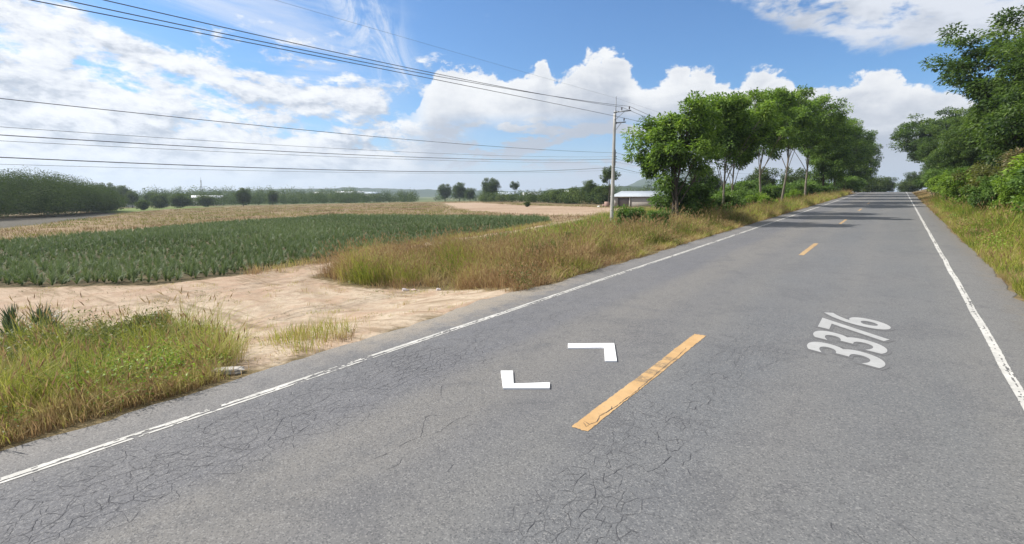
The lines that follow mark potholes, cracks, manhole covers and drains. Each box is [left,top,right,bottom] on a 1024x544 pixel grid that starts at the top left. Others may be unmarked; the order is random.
crack [492,302,832,544]
crack [0,350,470,544]
